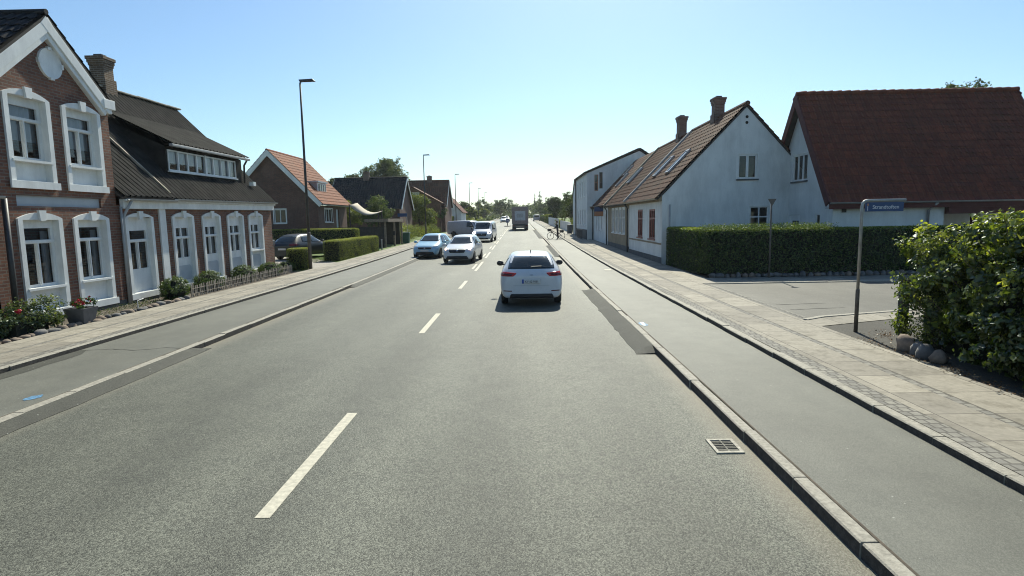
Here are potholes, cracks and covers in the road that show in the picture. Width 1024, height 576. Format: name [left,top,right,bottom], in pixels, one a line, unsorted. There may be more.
drain grate [705,439,745,454]
